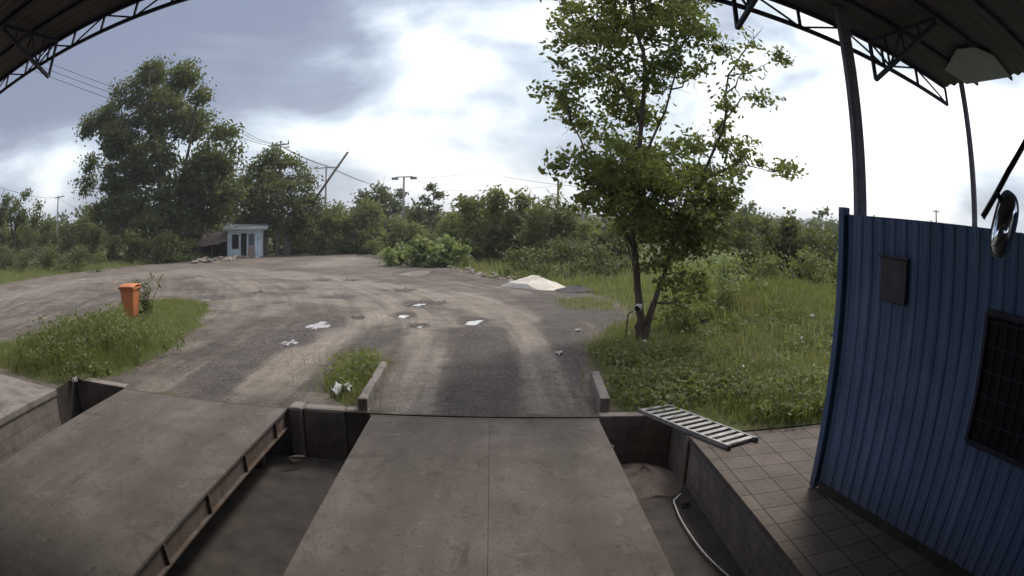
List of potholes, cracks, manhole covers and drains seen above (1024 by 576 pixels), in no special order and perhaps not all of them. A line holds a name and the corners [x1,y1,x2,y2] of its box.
pothole [460,317,487,326]
